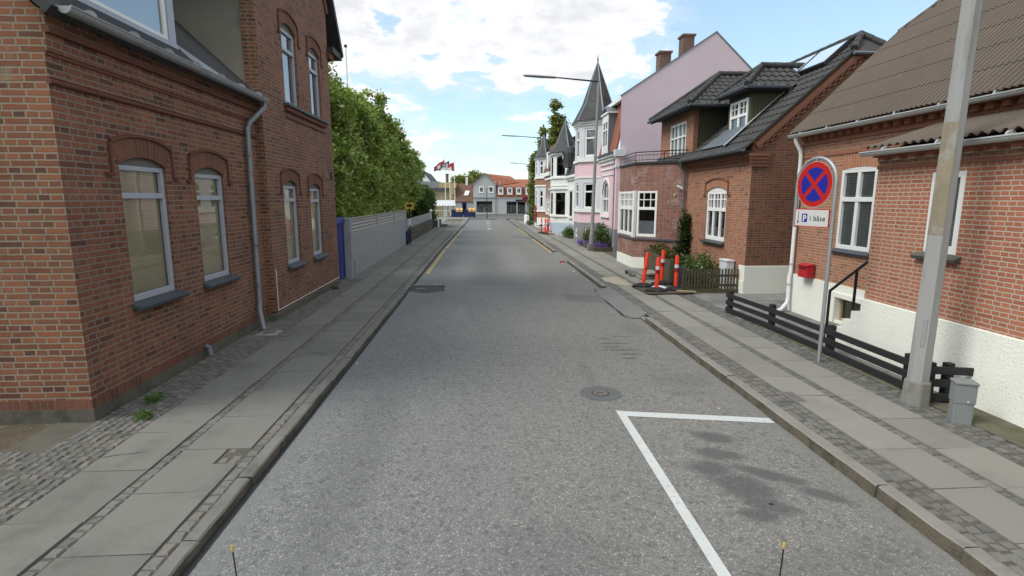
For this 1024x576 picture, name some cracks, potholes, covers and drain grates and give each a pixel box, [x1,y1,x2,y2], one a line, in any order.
manhole cover [580,386,622,401]
